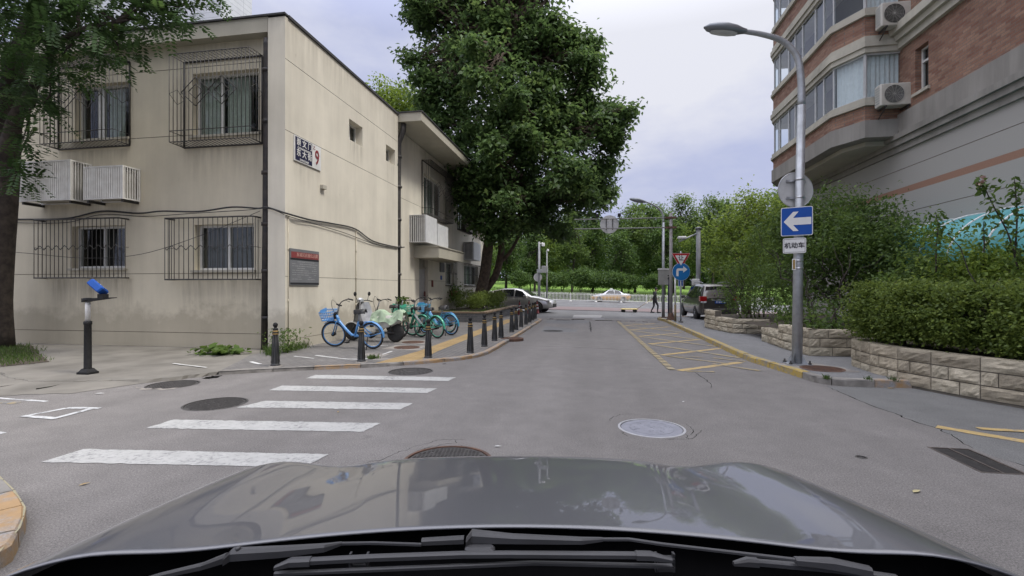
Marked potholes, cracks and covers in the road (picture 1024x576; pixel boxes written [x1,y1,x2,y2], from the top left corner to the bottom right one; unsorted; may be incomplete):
manhole cover [144,380,200,389]
drain grate [928,447,1024,475]
manhole cover [181,397,249,411]
manhole cover [404,446,491,459]
manhole cover [618,419,686,438]
crack [838,391,1024,466]
